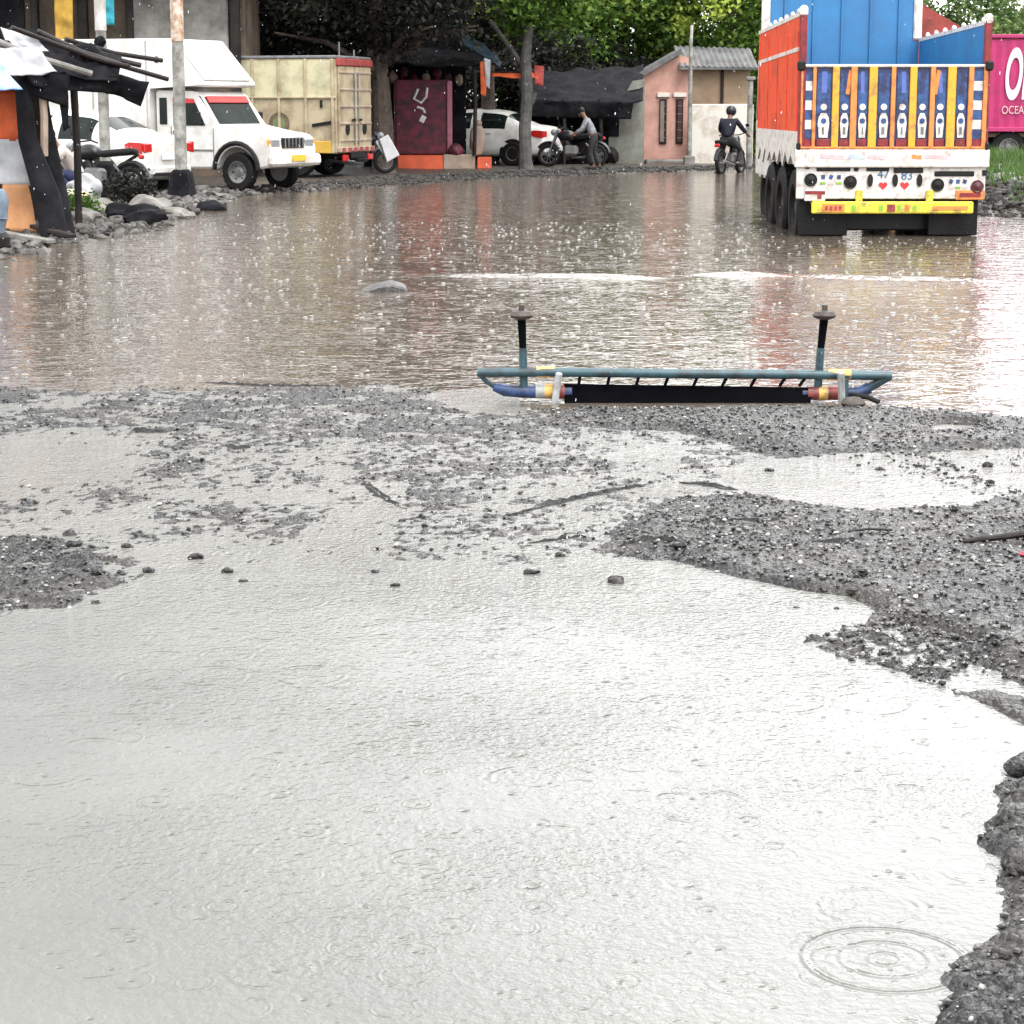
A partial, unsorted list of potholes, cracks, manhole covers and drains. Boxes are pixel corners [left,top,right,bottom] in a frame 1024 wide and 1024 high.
crack [505,483,654,515]
pothole [0,543,1024,1024]
pothole [693,435,1024,510]
crack [359,477,403,508]
